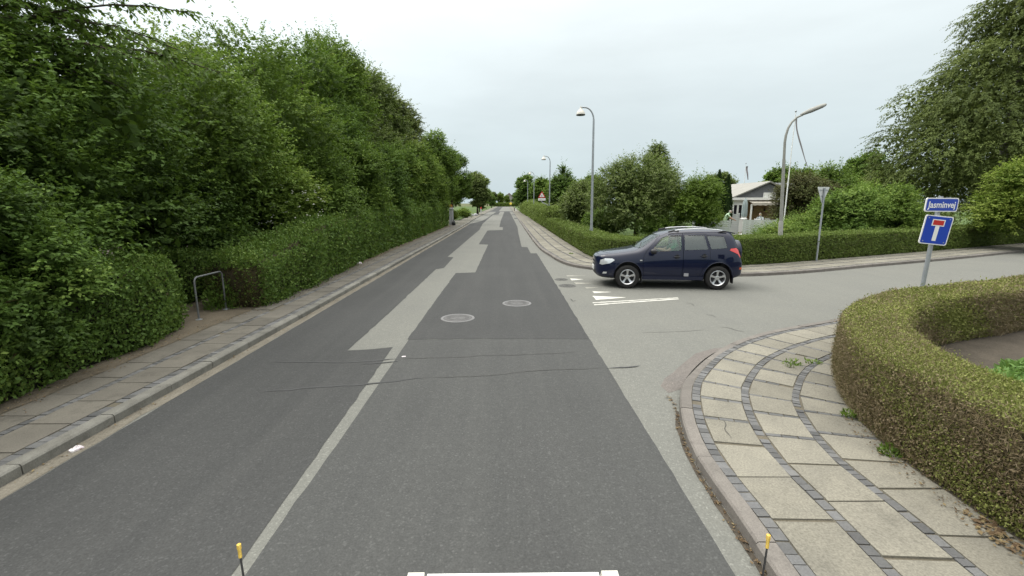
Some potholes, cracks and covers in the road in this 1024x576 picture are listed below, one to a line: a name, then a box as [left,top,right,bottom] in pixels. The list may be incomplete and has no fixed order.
manhole cover [441,314,475,323]
